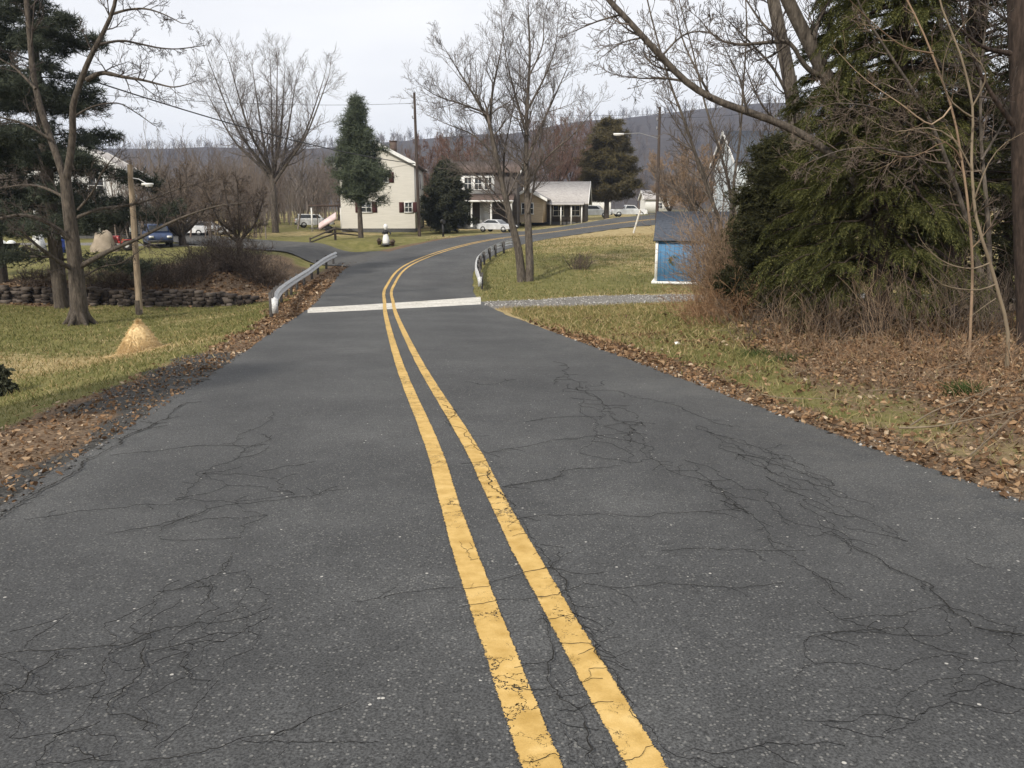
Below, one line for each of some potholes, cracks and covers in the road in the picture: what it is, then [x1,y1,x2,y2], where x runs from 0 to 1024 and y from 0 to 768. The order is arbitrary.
crack [0,553,378,766]
crack [26,416,341,541]
crack [353,363,1024,768]
